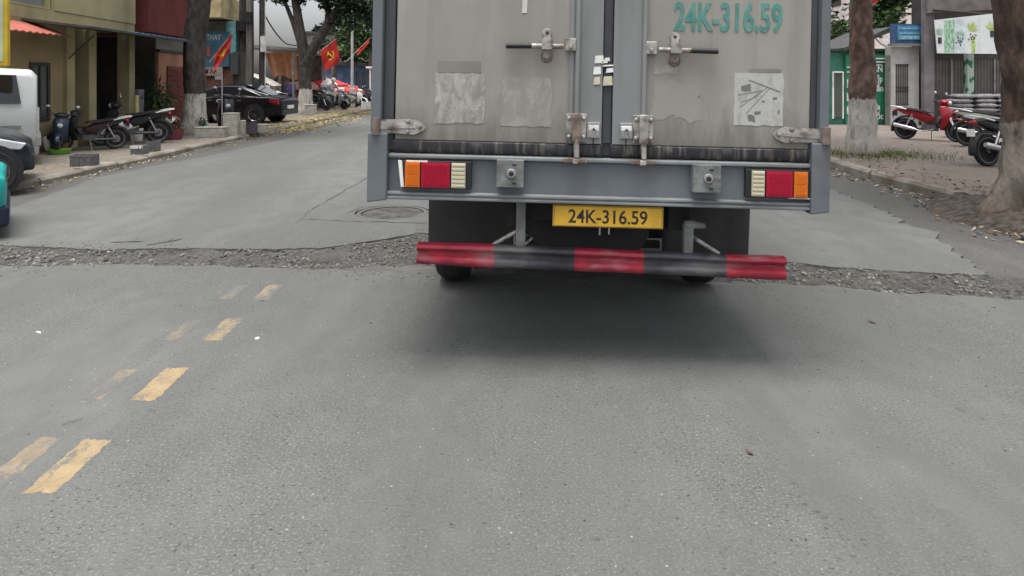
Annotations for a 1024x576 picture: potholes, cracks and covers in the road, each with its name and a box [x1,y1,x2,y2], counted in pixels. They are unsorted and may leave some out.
crack [297,178,410,223]
manhole cover [355,206,429,220]
pothole [0,233,1024,300]
